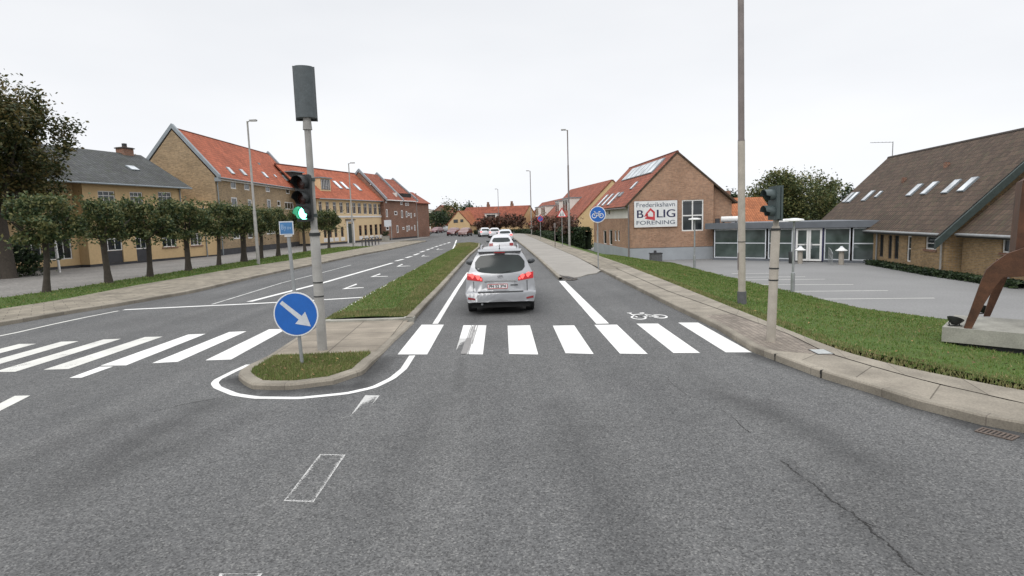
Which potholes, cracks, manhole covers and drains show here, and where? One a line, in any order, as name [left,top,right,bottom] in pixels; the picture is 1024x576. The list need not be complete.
drain grate [974,427,1020,441]
crack [781,460,923,575]
